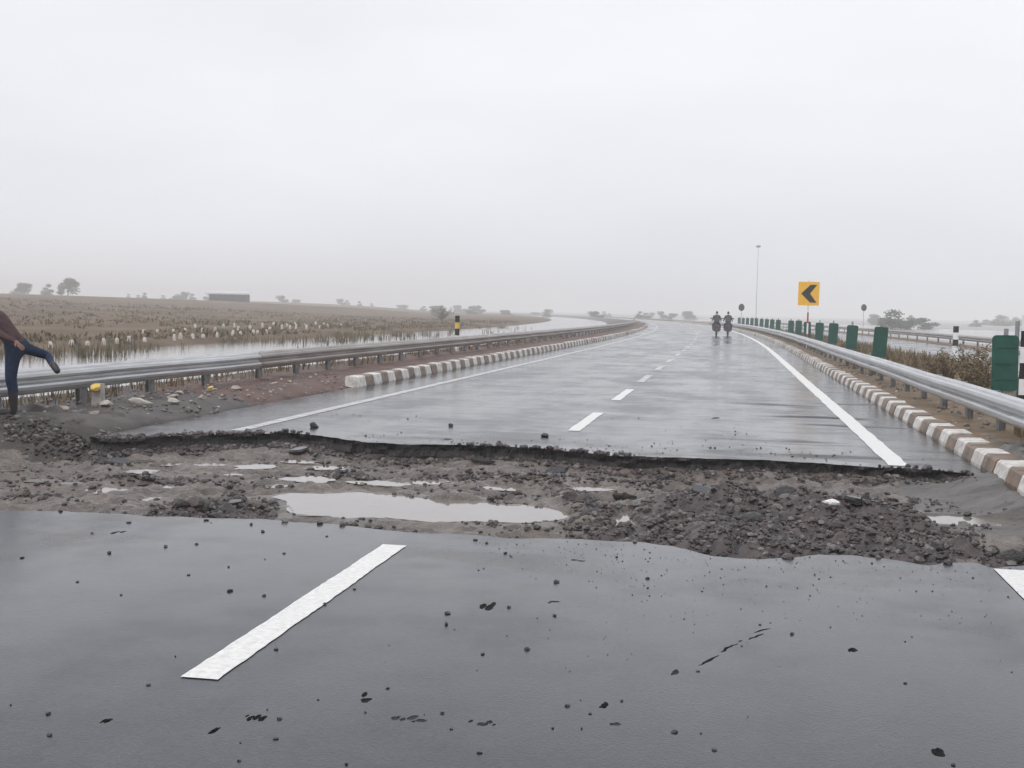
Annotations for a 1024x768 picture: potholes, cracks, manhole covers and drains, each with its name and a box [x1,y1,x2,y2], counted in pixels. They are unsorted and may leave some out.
crack [699,628,770,666]
pothole [0,404,1024,568]
